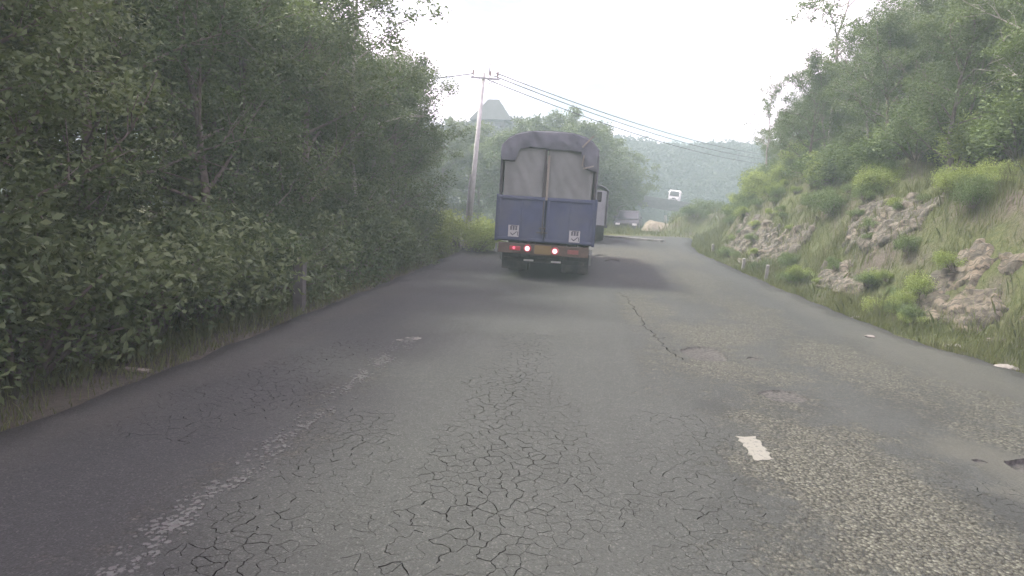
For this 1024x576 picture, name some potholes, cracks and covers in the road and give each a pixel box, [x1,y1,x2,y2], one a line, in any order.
crack [80,339,389,447]
crack [616,411,792,576]
crack [619,292,684,360]
crack [163,408,408,576]
crack [333,333,644,576]
pothole [1004,458,1024,473]
pothole [680,347,728,362]
pothole [759,390,809,402]
